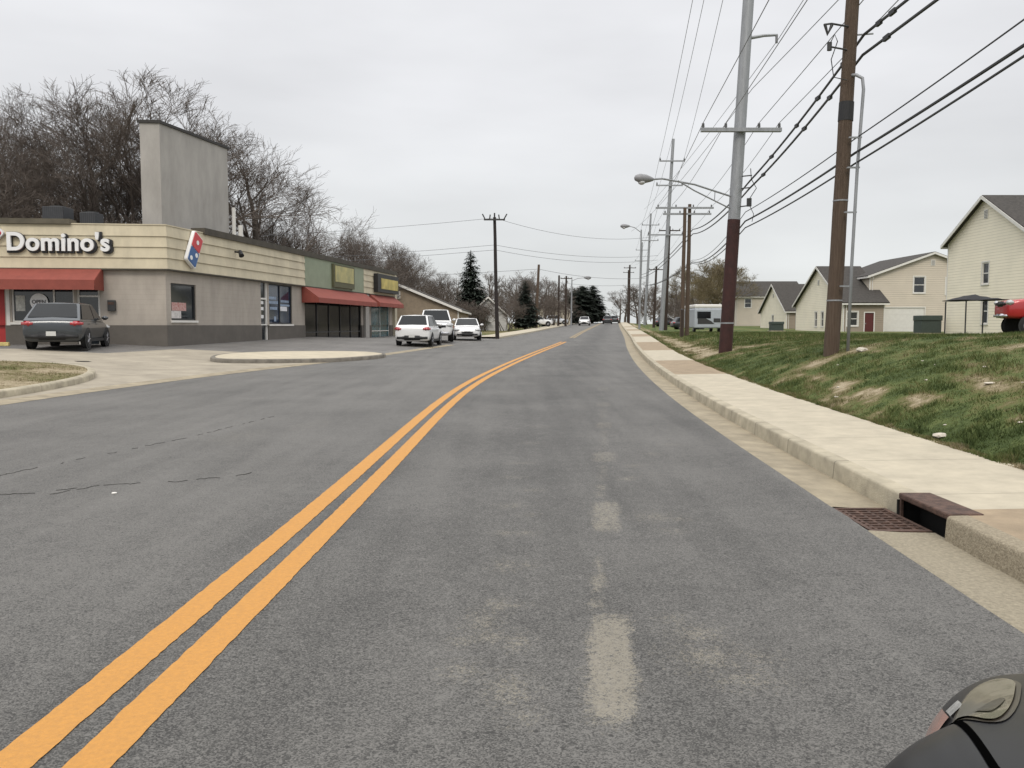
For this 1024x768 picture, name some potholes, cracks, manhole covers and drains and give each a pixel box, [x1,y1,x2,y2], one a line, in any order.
drain grate [834,493,984,538]
crack [0,472,251,495]
crack [0,418,264,476]
